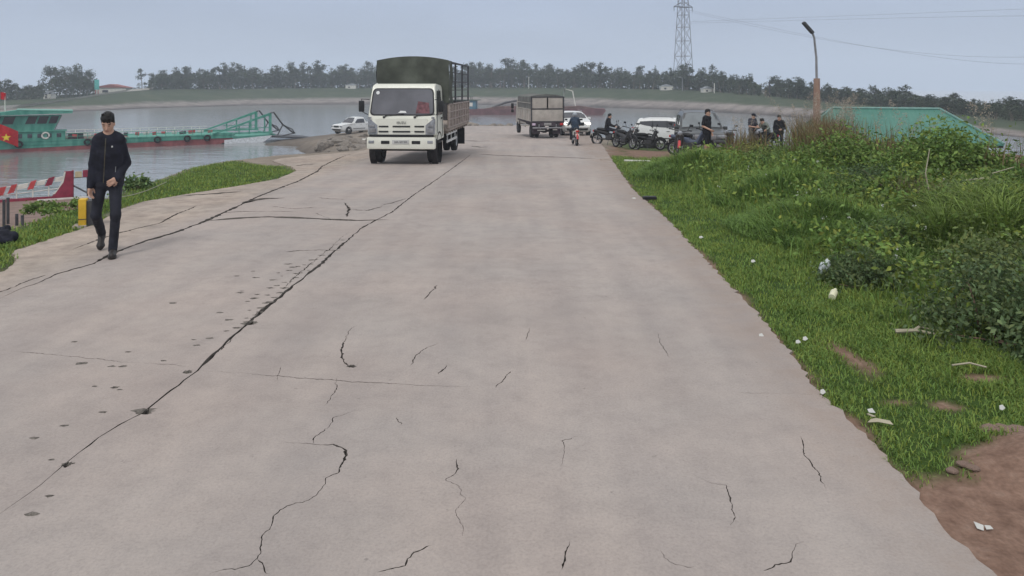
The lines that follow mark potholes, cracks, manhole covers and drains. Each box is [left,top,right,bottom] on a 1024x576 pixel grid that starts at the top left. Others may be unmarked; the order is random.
crack [0,155,470,573]
